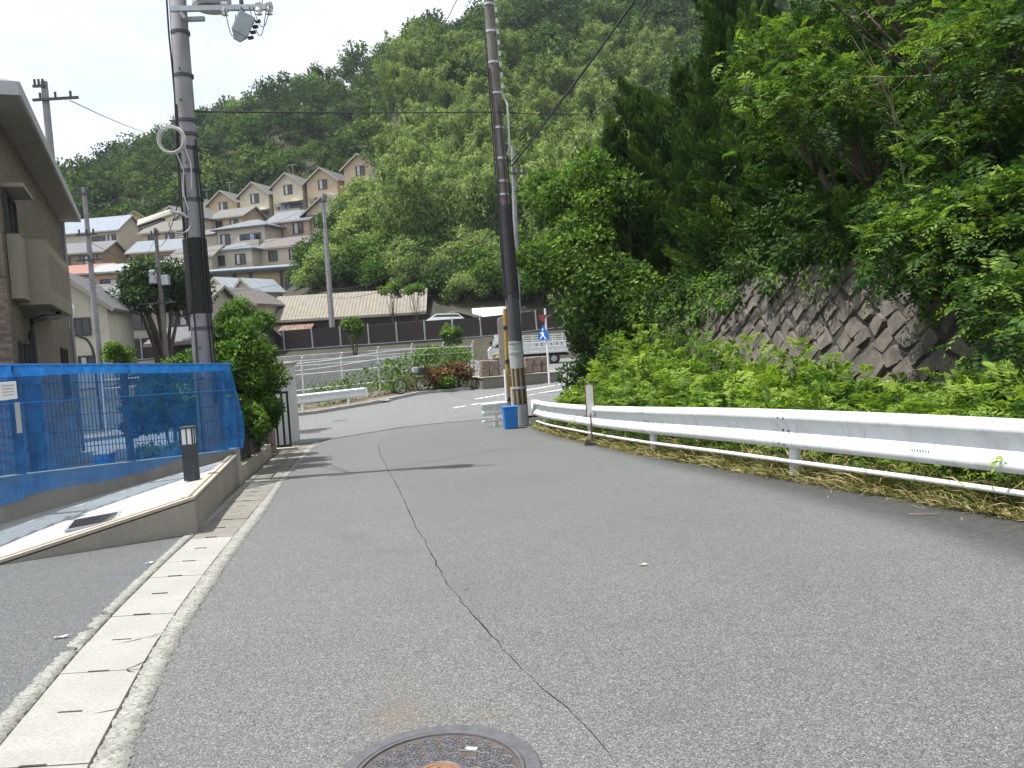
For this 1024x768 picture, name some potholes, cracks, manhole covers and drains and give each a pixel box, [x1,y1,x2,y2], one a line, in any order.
drain grate [64,511,121,532]
manhole cover [343,725,542,768]
crack [378,446,618,768]
